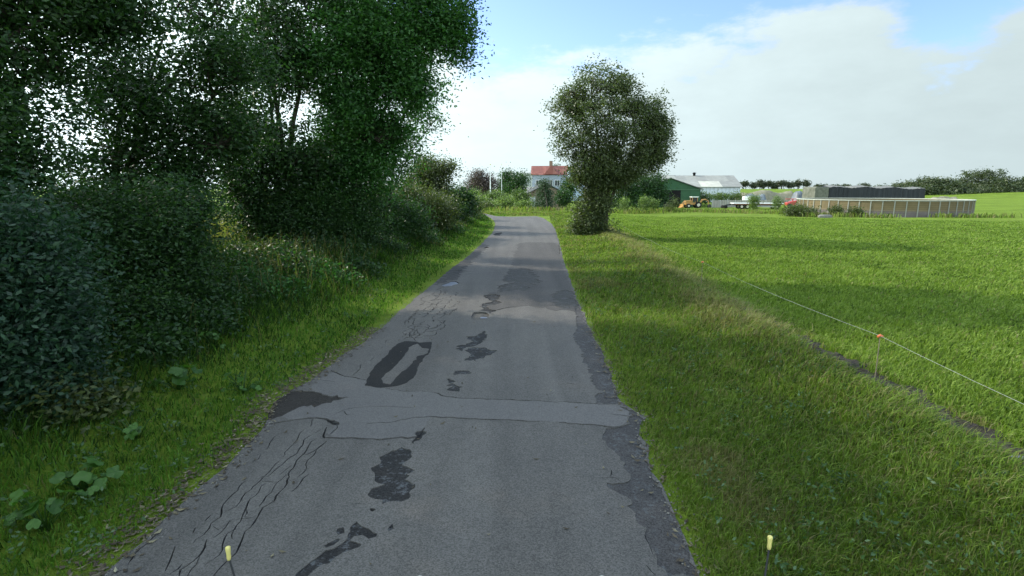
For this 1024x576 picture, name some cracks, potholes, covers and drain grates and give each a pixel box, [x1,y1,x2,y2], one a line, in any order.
crack [168,419,423,576]
